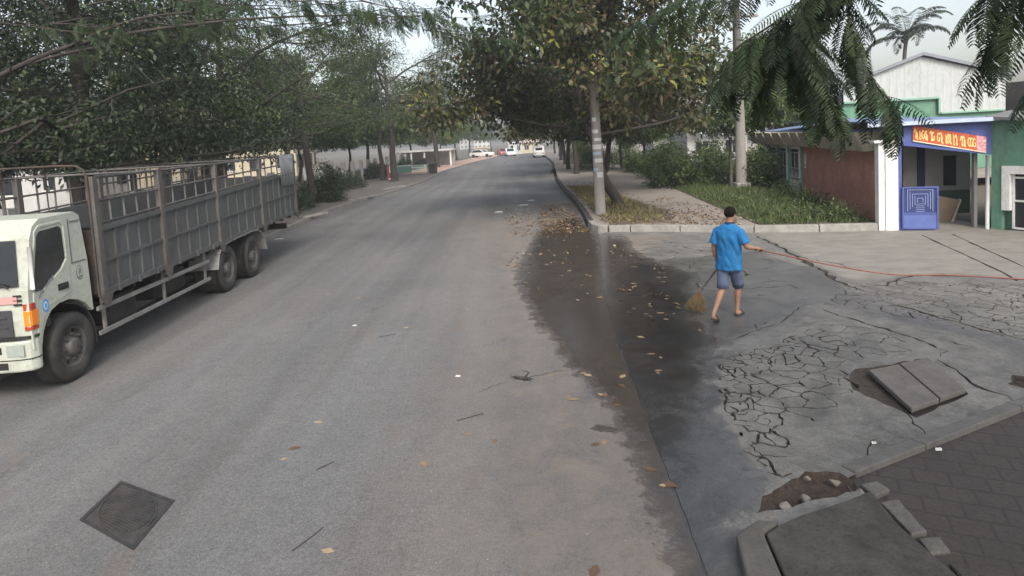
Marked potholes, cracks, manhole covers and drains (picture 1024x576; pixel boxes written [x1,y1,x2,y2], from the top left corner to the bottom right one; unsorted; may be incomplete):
crack [480,369,568,392]
crack [629,236,1024,477]
pothole [757,471,858,513]
manhole cover [79,481,175,551]
